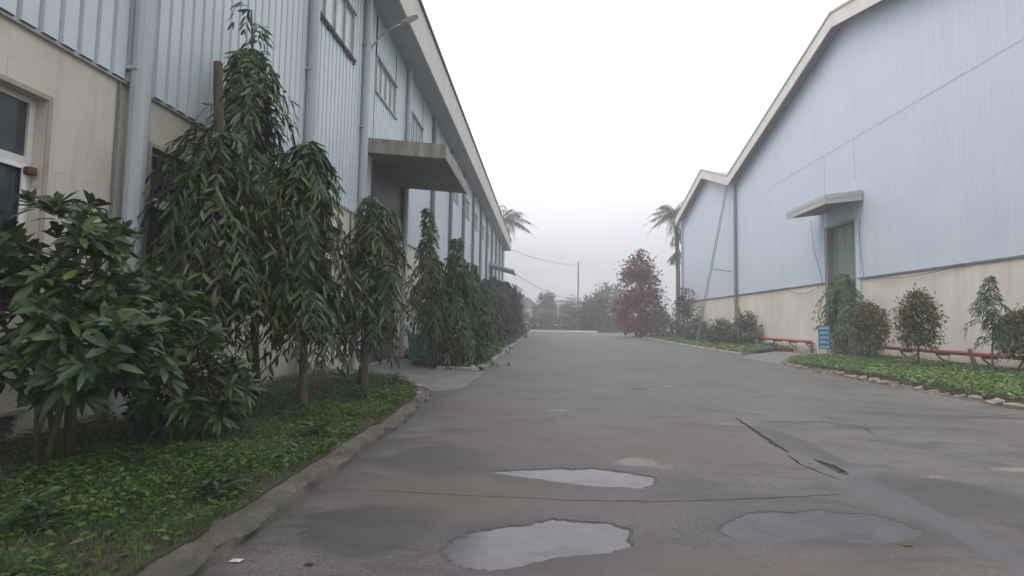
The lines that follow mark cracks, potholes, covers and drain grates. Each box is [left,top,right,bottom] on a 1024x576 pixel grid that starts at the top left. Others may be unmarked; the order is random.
crack [735,417,875,480]
